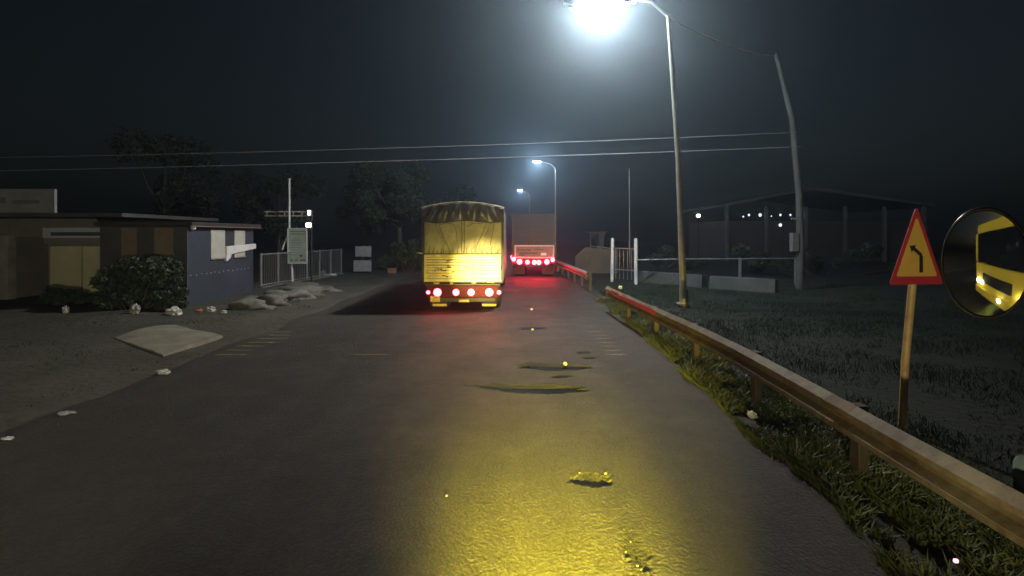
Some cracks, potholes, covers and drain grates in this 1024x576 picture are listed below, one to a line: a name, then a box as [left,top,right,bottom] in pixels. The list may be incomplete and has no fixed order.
pothole [516,362,594,371]
pothole [463,383,592,395]
pothole [566,471,615,488]
pothole [615,527,657,573]
